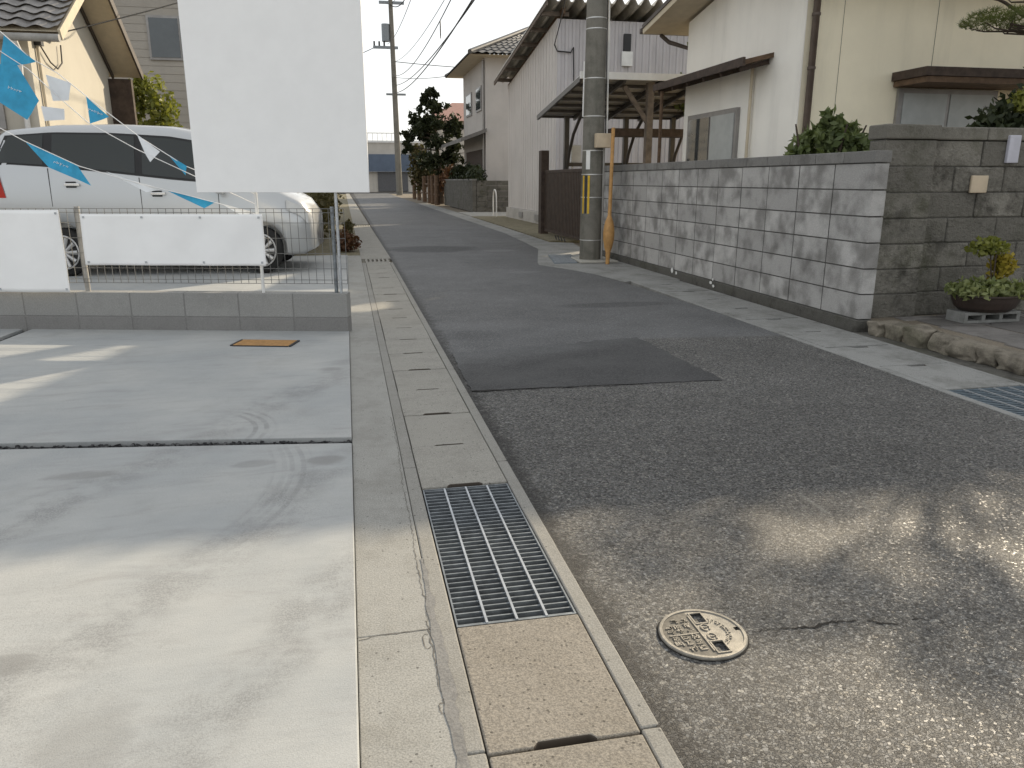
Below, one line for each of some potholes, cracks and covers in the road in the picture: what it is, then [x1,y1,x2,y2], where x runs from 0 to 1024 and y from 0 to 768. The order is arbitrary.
drain grate [948,386,1024,417]
drain grate [548,254,577,264]
crack [753,618,917,632]
crack [362,417,445,714]
drain grate [423,483,577,634]
manhole cover [656,609,749,661]
